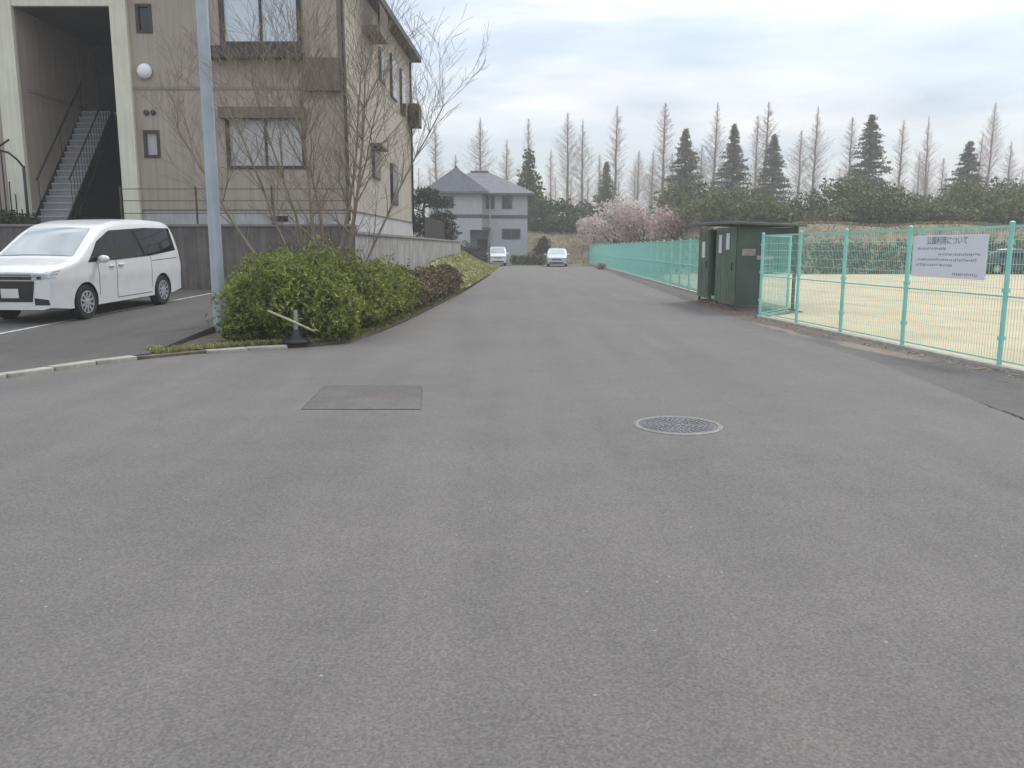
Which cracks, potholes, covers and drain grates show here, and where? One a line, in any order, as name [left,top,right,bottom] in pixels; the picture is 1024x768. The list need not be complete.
manhole cover [633,416,723,435]
